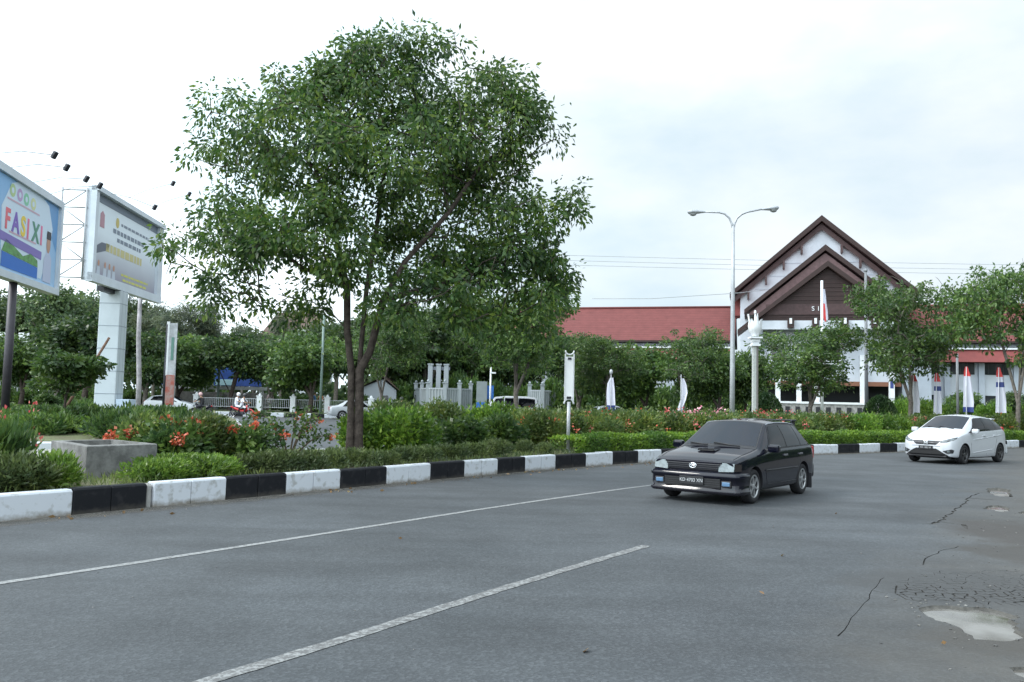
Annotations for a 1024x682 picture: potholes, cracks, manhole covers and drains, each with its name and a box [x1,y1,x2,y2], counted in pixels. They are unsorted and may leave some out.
pothole [919,605,1024,641]
pothole [986,488,1013,497]
crack [837,571,1024,636]
crack [931,493,980,529]
